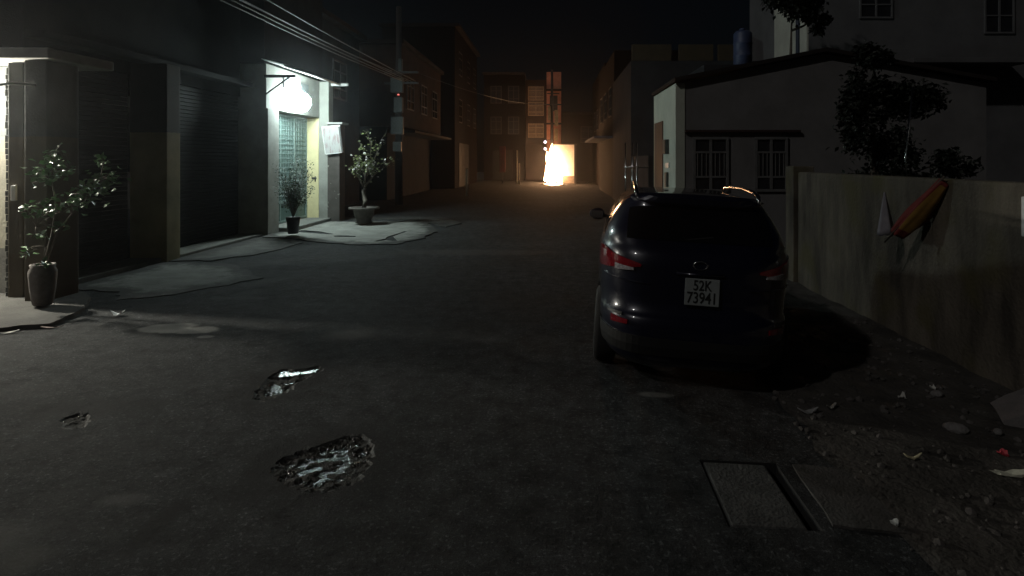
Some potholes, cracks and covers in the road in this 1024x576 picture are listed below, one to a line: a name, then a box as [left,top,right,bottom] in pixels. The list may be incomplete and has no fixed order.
pothole [57,413,94,429]
pothole [270,434,375,494]
manhole cover [699,459,823,531]
pothole [252,366,324,402]
